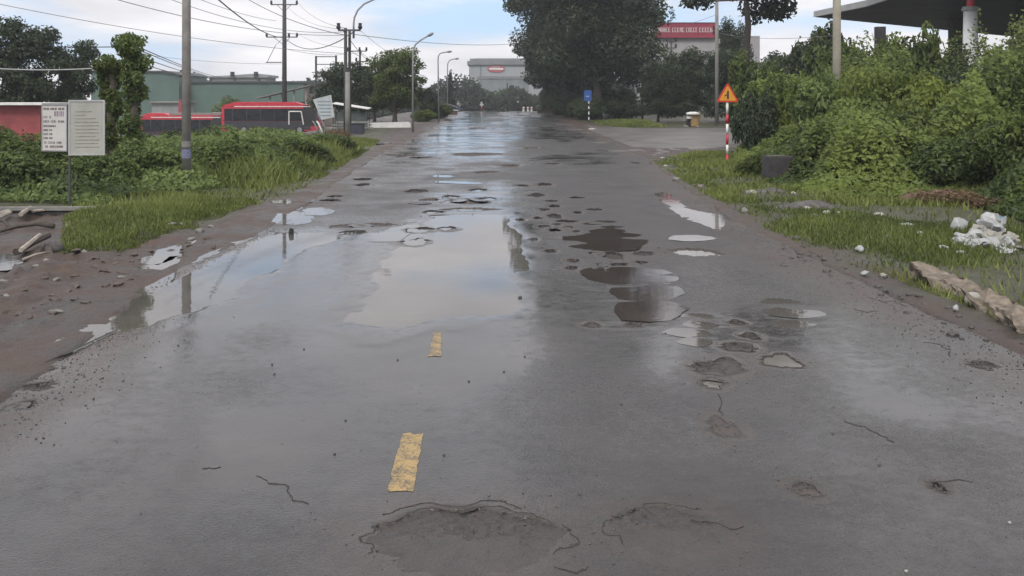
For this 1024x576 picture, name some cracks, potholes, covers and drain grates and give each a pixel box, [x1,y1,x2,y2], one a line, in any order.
pothole [710,339,767,355]
pothole [389,238,434,247]
crack [845,421,893,442]
crack [359,500,588,574]
pothole [749,350,815,371]
pothole [720,317,754,326]
pothole [678,354,758,382]
pothole [958,358,1008,373]
crack [258,476,309,504]
pothole [690,372,735,393]
pothole [345,499,589,576]
pothole [776,475,838,505]
